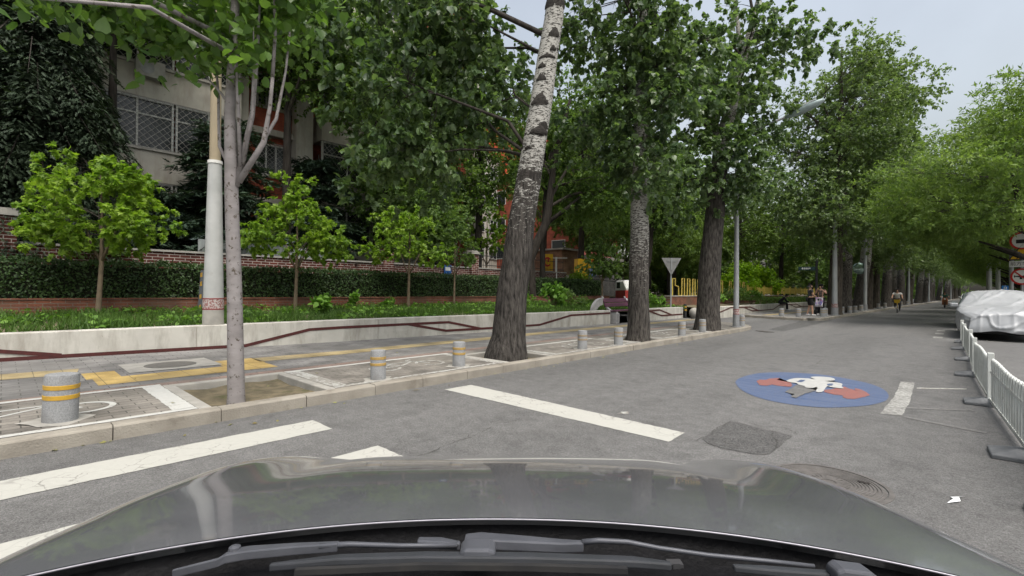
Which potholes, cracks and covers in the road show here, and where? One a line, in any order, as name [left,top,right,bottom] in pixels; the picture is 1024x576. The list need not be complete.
manhole cover [119,358,221,373]
manhole cover [777,463,895,505]
